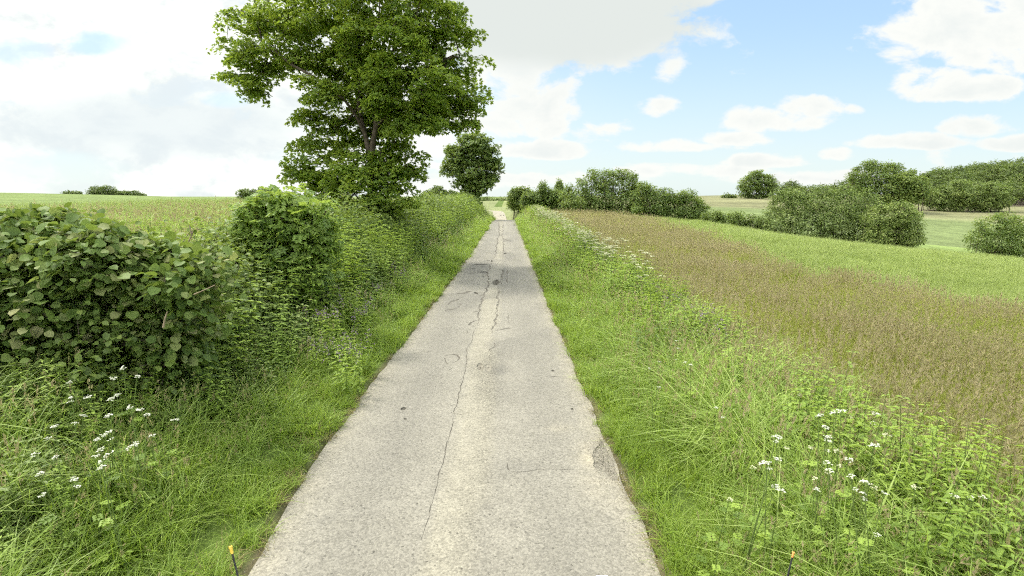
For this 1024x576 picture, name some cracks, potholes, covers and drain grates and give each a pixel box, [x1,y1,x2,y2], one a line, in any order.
pothole [592,441,618,483]
crack [445,260,509,311]
